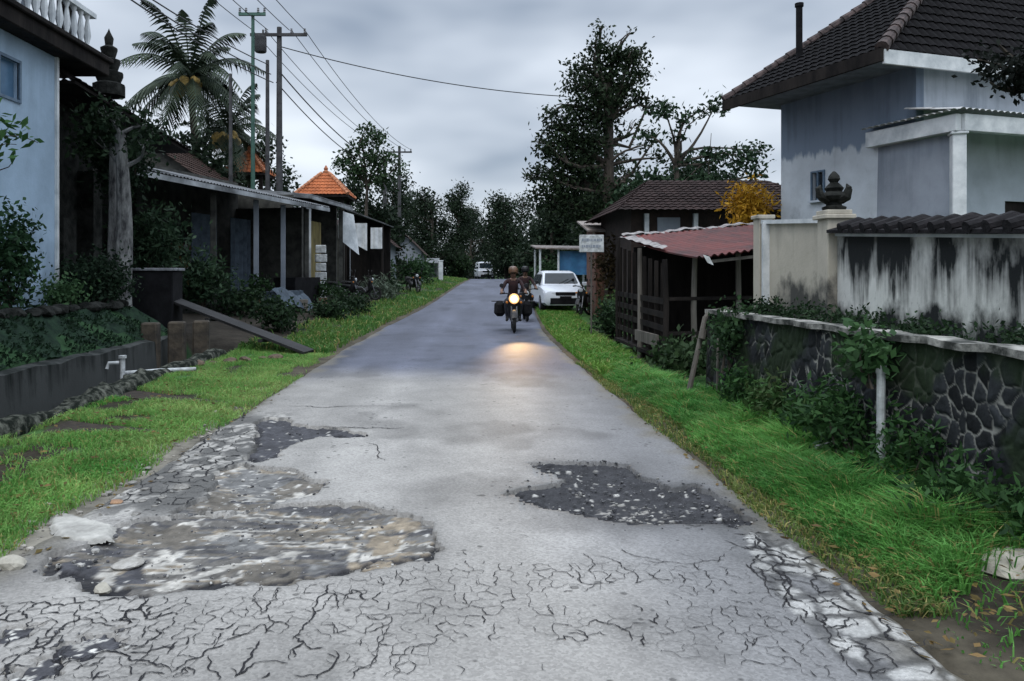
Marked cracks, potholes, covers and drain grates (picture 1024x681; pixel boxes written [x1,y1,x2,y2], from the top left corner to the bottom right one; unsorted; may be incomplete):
crack [0,532,891,681]
pothole [515,463,752,528]
pothole [171,466,325,521]
pothole [247,420,365,463]
pothole [43,504,440,599]
